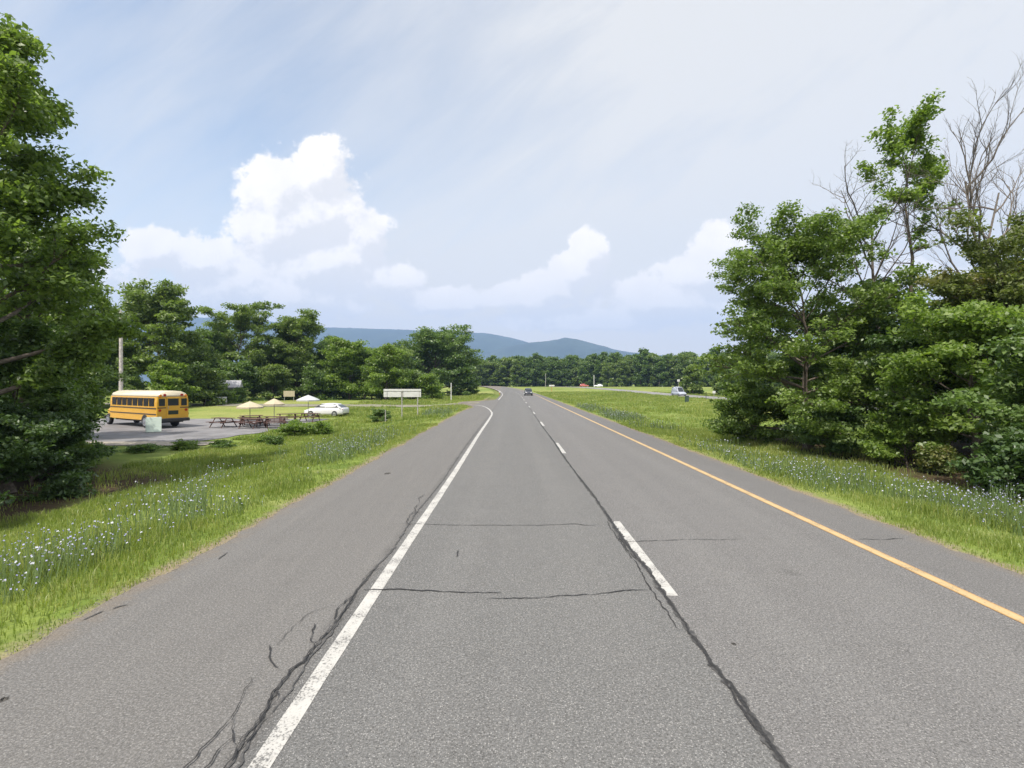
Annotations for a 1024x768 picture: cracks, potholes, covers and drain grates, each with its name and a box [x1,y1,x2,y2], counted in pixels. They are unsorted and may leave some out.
crack [183,402,792,768]
